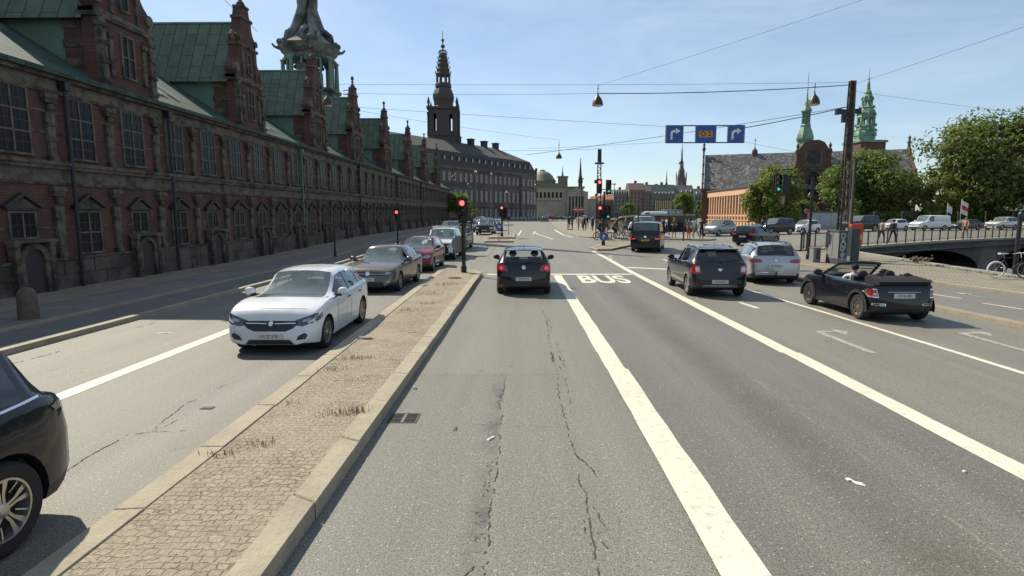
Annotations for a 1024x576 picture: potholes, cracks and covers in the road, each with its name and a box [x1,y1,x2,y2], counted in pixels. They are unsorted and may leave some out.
crack [68,386,222,470]
crack [464,378,535,576]
drain grate [386,413,421,423]
crack [546,318,608,575]
